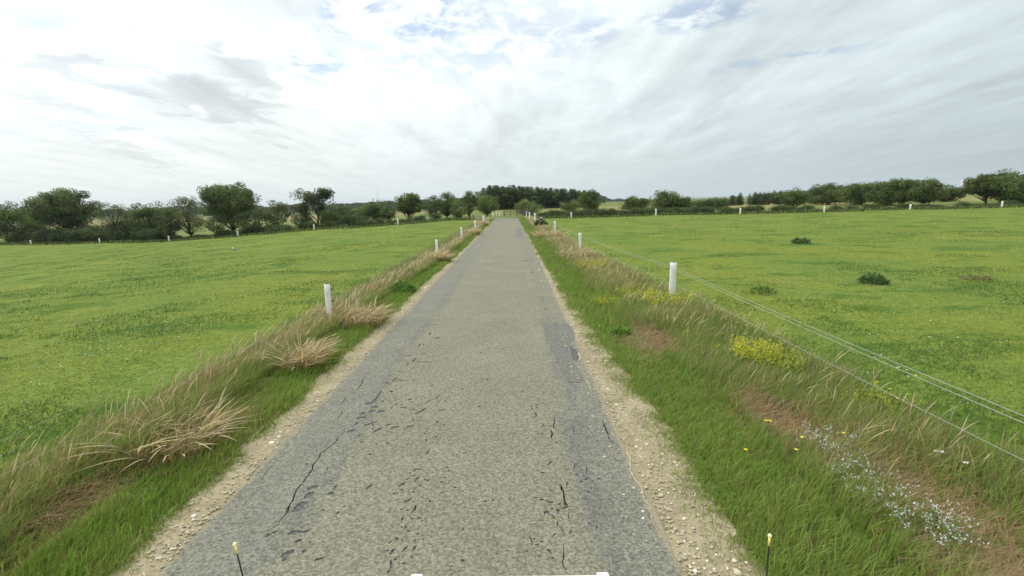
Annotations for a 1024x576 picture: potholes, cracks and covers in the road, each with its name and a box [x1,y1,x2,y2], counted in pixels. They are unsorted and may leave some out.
crack [530,482,569,573]
crack [265,377,365,535]
